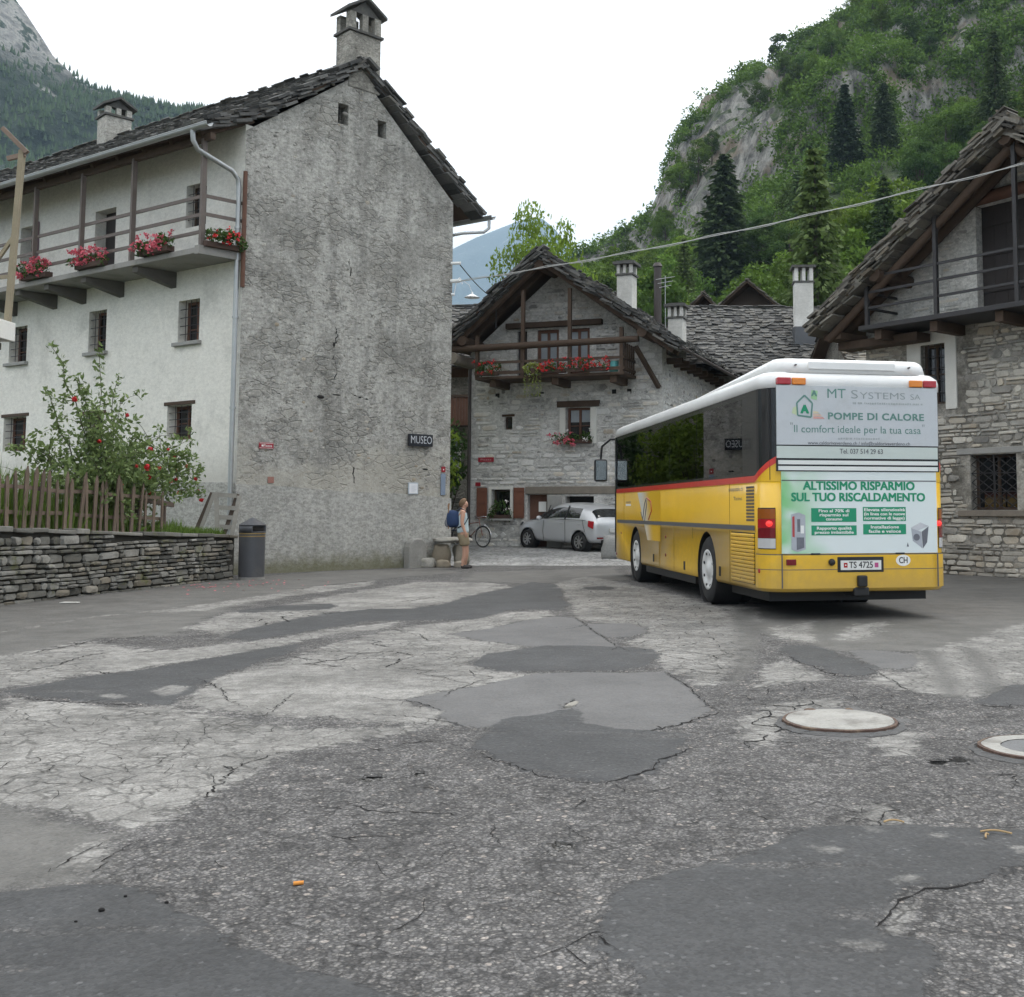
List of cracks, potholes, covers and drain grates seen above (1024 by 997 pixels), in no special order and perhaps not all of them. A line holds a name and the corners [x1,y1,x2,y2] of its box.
pothole [918,756,983,768]
crack [214,586,993,963]
manhole cover [968,734,1024,764]
crack [48,839,146,872]
crack [1,677,303,805]
manhole cover [774,708,907,737]
